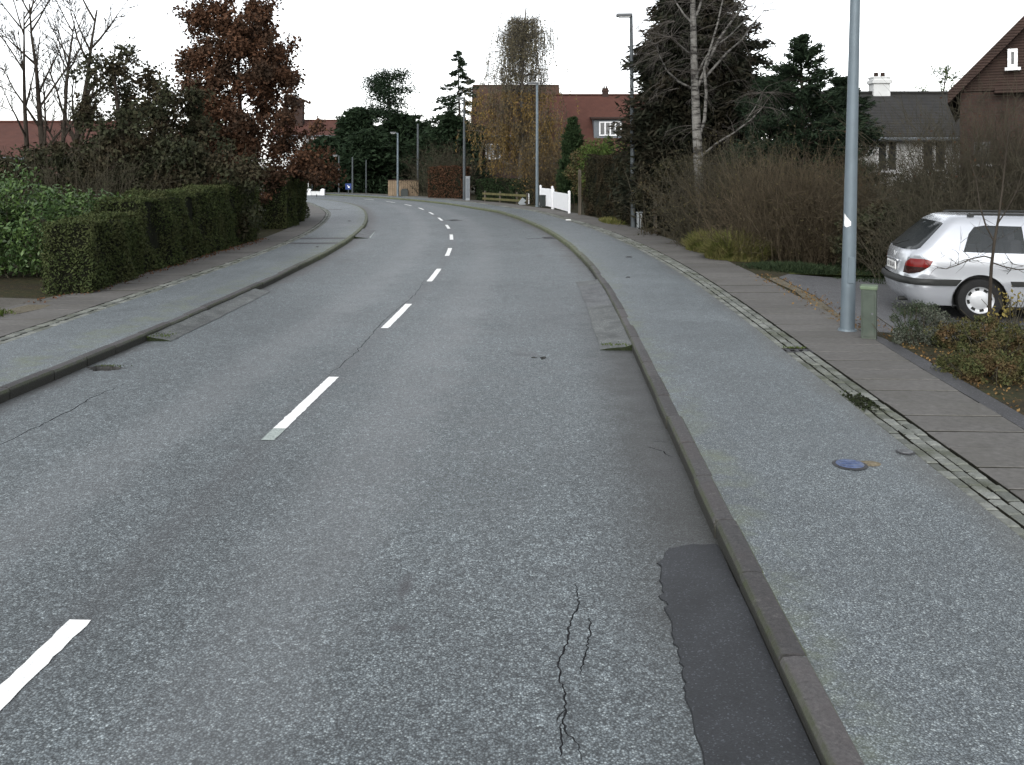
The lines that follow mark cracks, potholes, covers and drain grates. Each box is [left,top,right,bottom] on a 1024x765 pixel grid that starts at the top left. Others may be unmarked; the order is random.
crack [0,384,123,445]
manhole cover [832,459,881,470]
crack [557,583,592,760]
